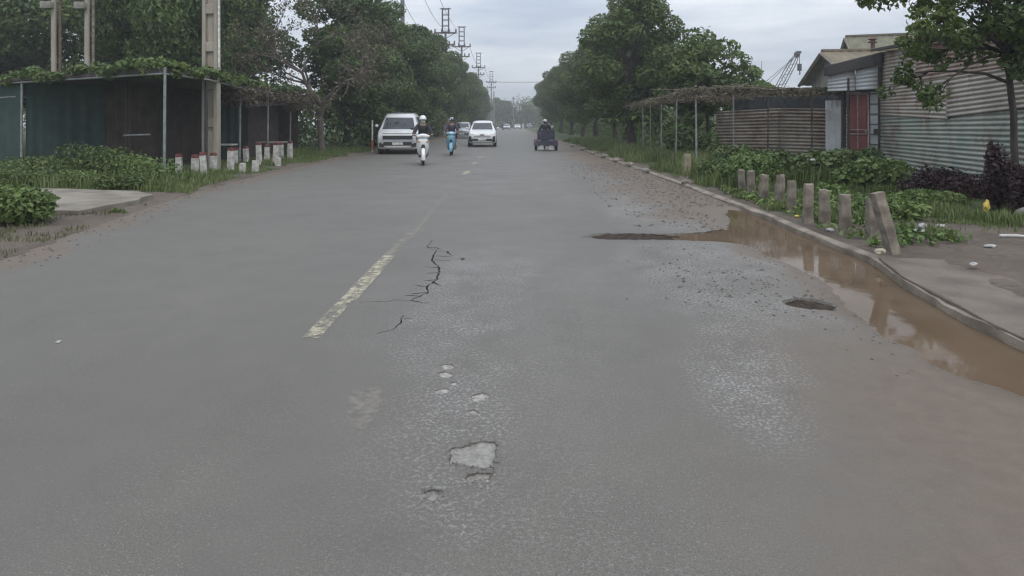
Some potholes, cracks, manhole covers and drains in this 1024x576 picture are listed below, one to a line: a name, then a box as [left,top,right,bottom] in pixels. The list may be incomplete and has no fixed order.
pothole [782,297,839,311]
pothole [466,472,494,482]
pothole [449,441,497,468]
pothole [424,489,442,501]
crack [373,244,451,334]
pothole [581,229,724,240]
pothole [471,392,491,402]
